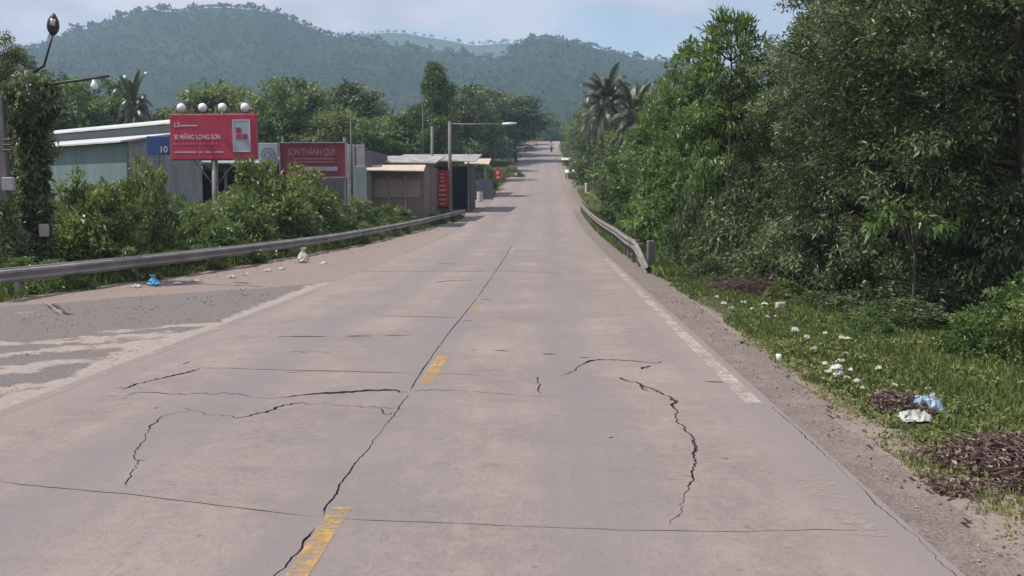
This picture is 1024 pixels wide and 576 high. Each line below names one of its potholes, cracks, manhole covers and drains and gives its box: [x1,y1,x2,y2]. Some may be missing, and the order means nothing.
crack [561,357,718,522]
crack [105,335,541,576]
